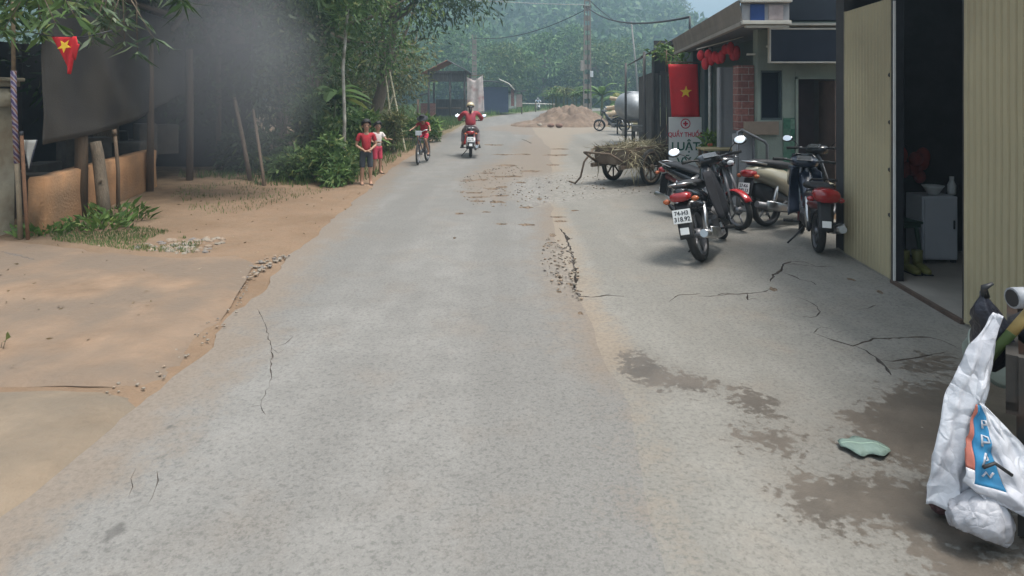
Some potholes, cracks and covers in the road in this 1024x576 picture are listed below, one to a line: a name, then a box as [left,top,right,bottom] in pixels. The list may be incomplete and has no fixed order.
crack [251,310,290,415]
crack [670,261,956,375]
crack [559,228,615,297]
